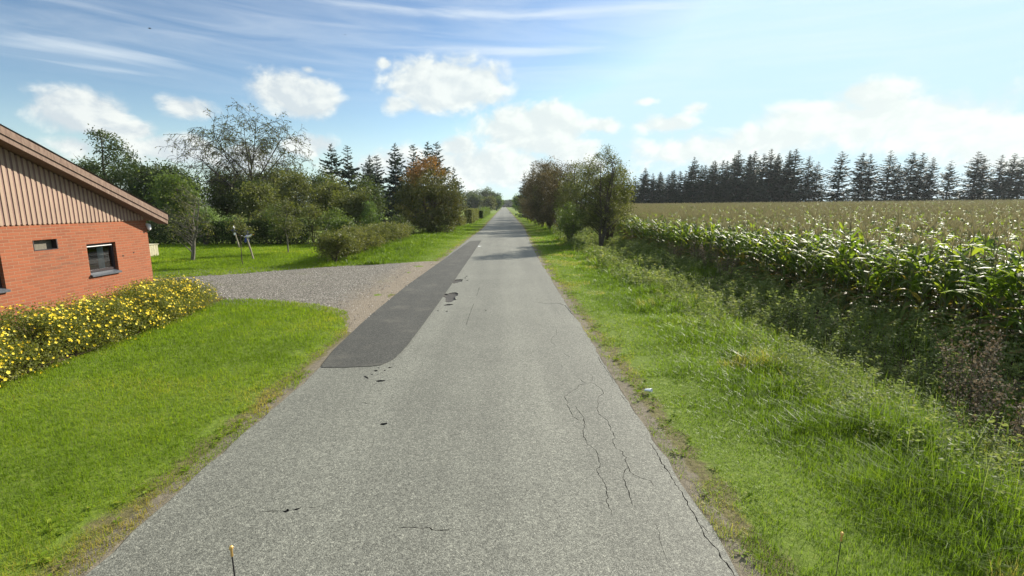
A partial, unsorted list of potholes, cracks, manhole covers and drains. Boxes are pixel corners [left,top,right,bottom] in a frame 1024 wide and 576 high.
crack [652,446,734,575]
crack [564,357,654,514]
